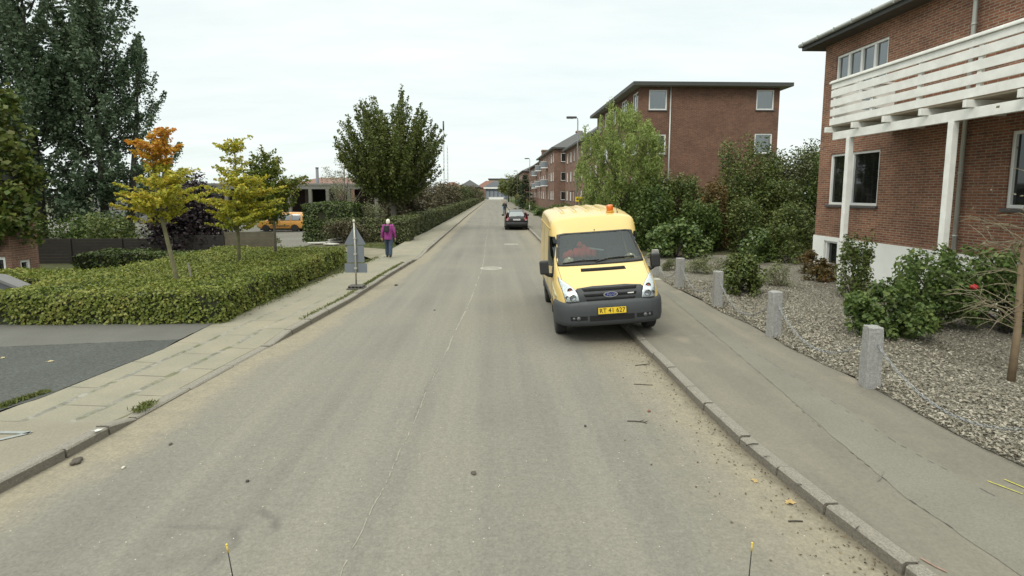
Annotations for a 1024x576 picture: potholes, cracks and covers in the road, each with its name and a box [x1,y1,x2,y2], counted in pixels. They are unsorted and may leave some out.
crack [340,369,438,576]
